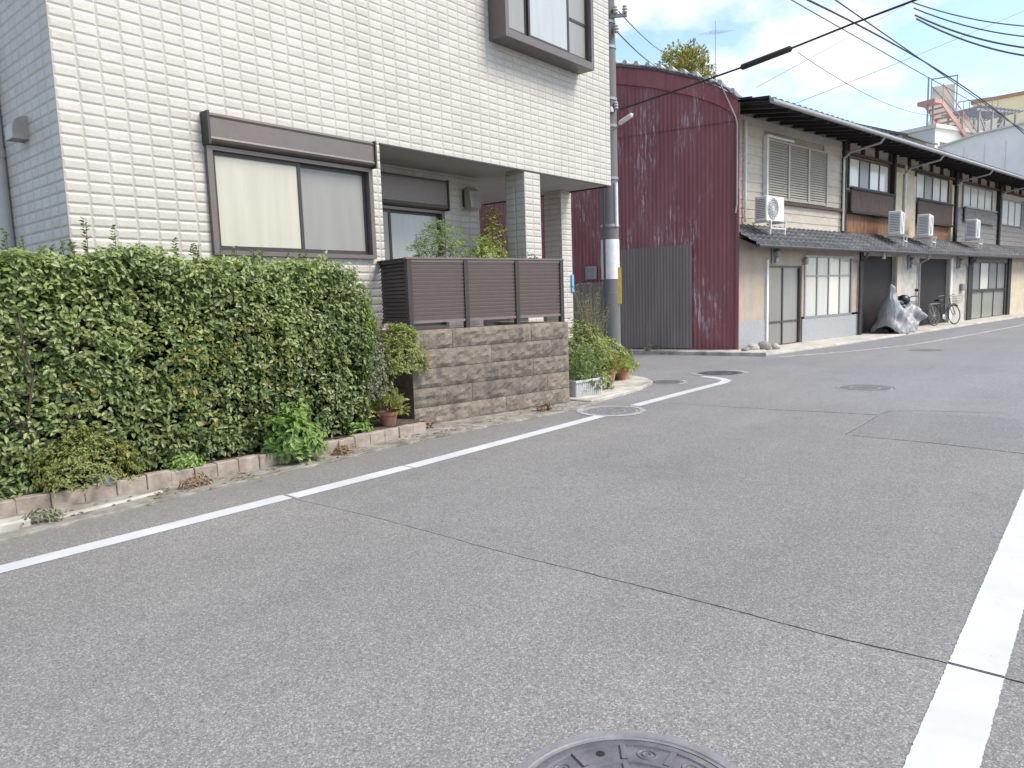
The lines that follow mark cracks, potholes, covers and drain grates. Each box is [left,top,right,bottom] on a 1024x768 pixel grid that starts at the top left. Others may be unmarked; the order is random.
manhole cover [576,406,646,416]
manhole cover [833,384,897,392]
manhole cover [516,730,738,768]
